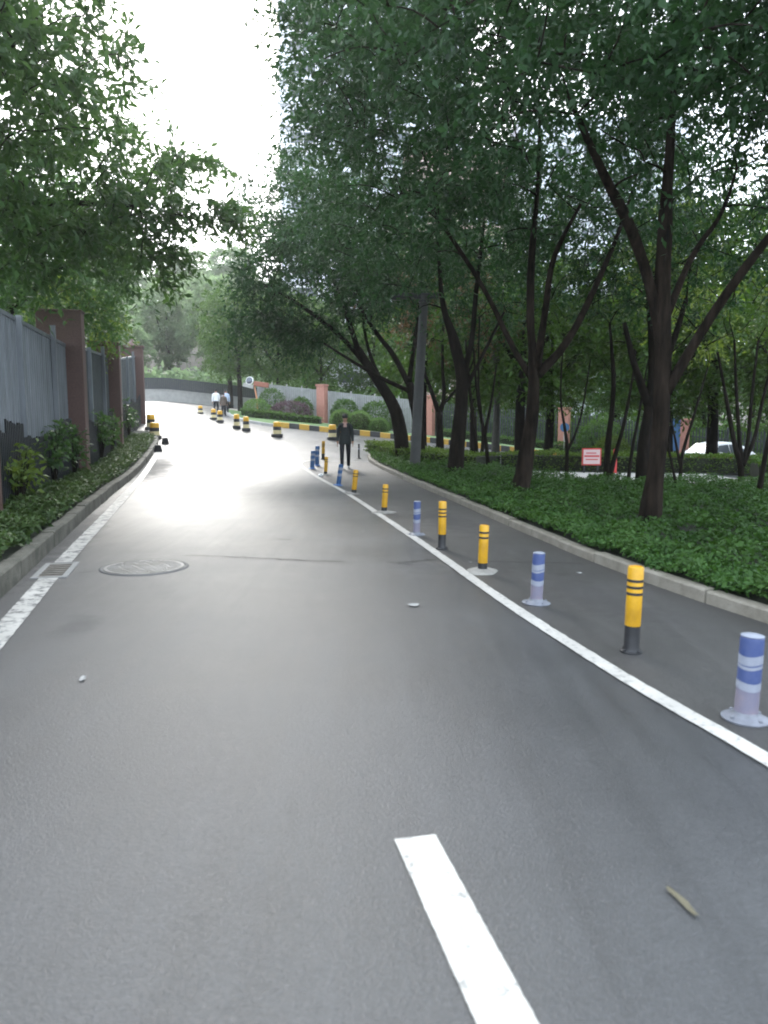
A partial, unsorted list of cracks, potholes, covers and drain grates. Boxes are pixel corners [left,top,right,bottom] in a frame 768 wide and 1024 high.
drain grate [30,562,79,580]
manhole cover [99,559,189,576]
